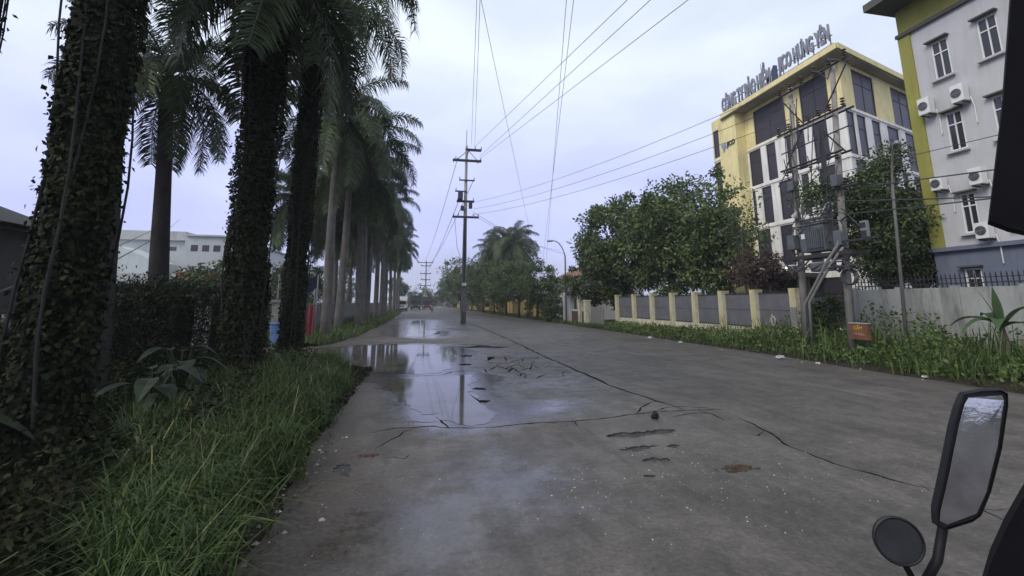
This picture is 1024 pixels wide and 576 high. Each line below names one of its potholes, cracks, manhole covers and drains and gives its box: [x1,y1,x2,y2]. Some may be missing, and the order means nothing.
crack [739,418,931,491]
crack [429,344,568,379]
crack [370,402,724,459]
pothole [606,429,675,438]
